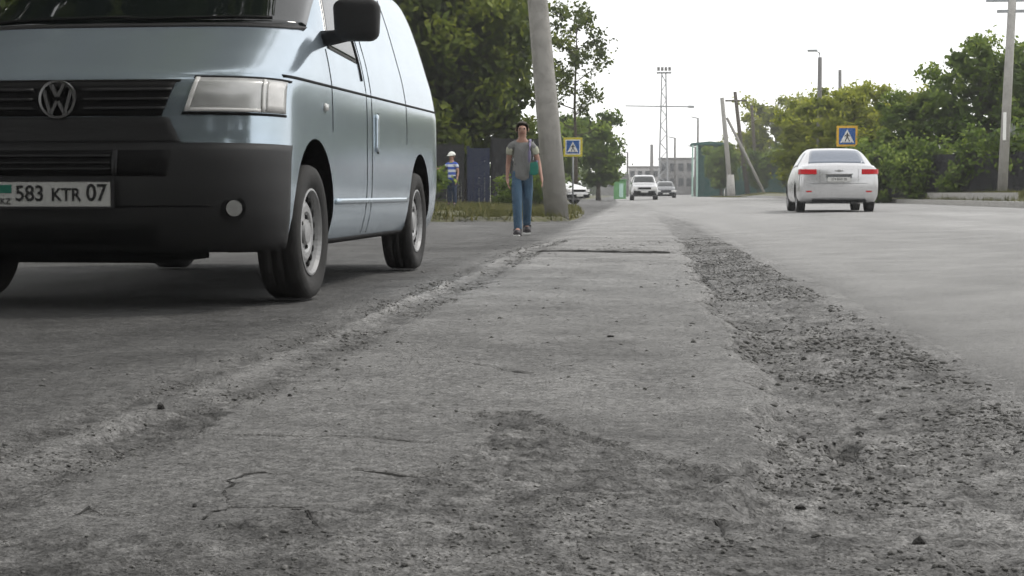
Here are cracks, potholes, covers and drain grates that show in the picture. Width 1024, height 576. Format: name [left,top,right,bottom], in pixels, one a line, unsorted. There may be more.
crack [201,472,330,537]
pothole [834,454,855,463]
crack [74,506,102,517]
